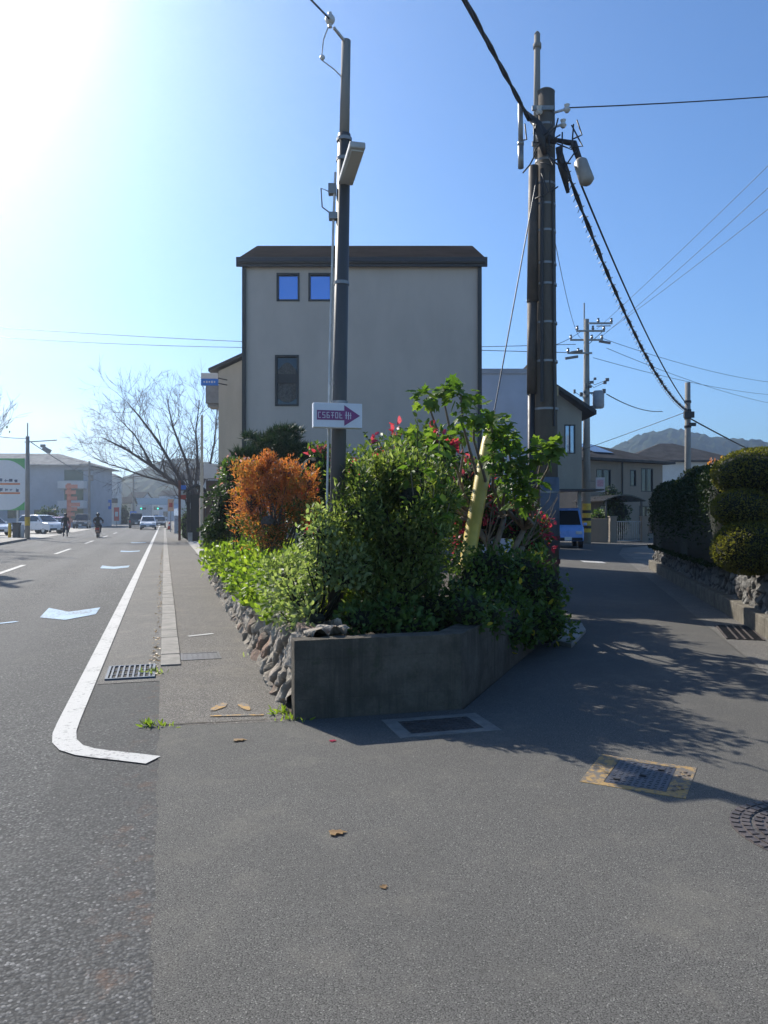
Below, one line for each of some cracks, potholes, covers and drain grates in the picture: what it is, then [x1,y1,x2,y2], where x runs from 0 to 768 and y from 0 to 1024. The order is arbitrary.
drain grate [104,664,156,681]
manhole cover [580,754,697,799]
manhole cover [729,800,768,851]
drain grate [715,624,766,641]
manhole cover [180,652,222,661]
manhole cover [382,713,501,738]
